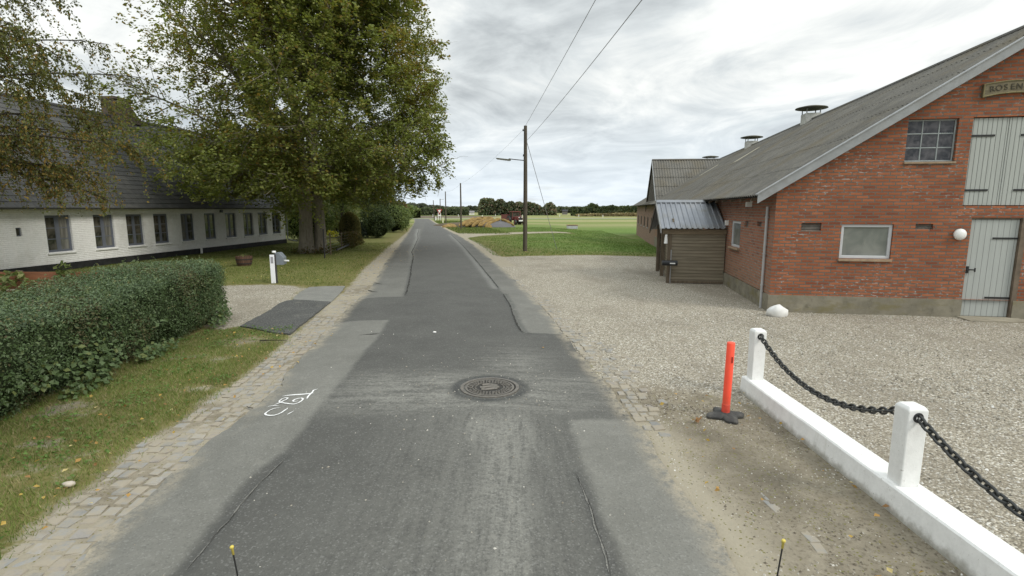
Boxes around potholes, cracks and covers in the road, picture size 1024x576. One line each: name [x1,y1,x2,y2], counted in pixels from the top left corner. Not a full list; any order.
manhole cover [460,377,519,398]
